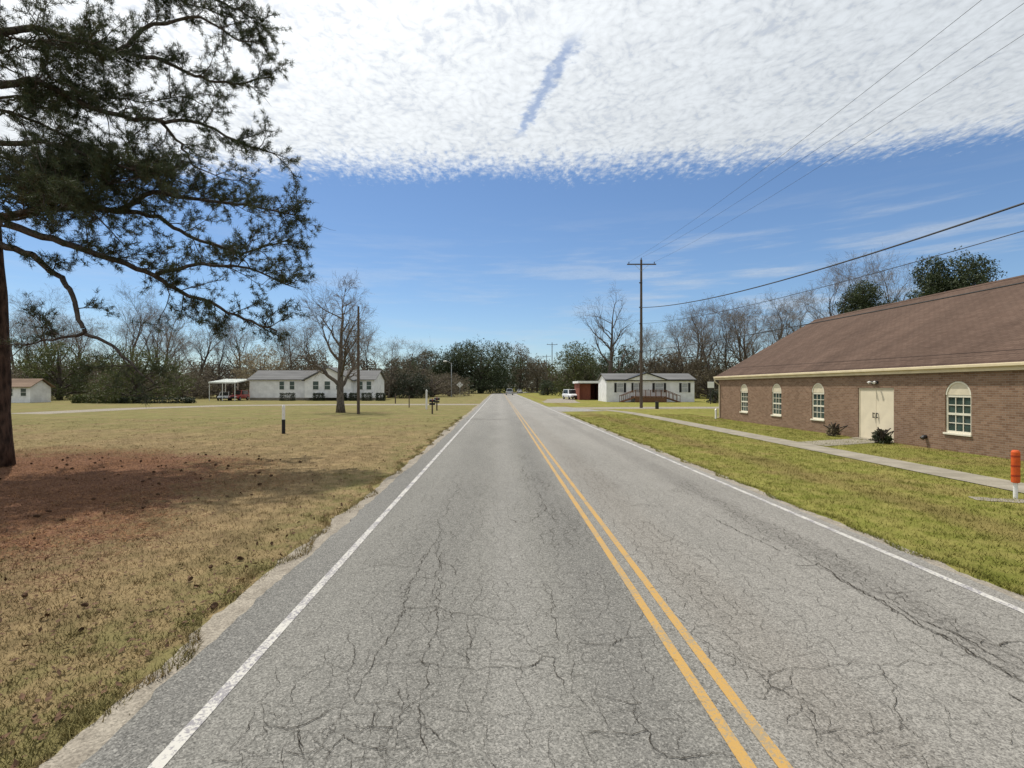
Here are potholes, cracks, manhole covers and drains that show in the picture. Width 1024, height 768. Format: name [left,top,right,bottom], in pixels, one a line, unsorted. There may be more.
crack [216,474,735,768]
crack [555,454,1024,768]
